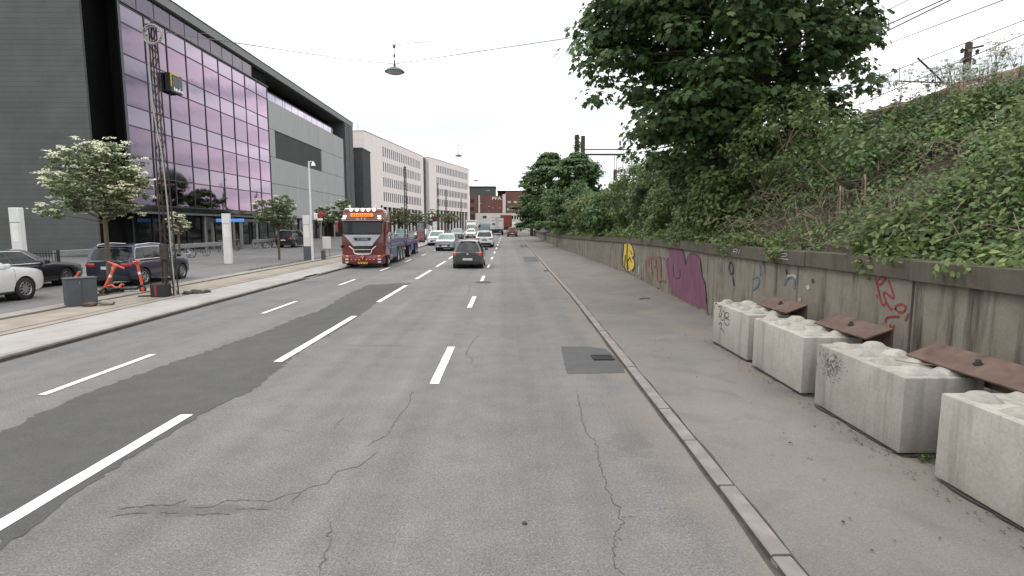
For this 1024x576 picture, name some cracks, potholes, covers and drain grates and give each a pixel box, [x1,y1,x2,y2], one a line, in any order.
crack [318,522,332,573]
crack [578,399,634,575]
crack [108,392,413,518]
